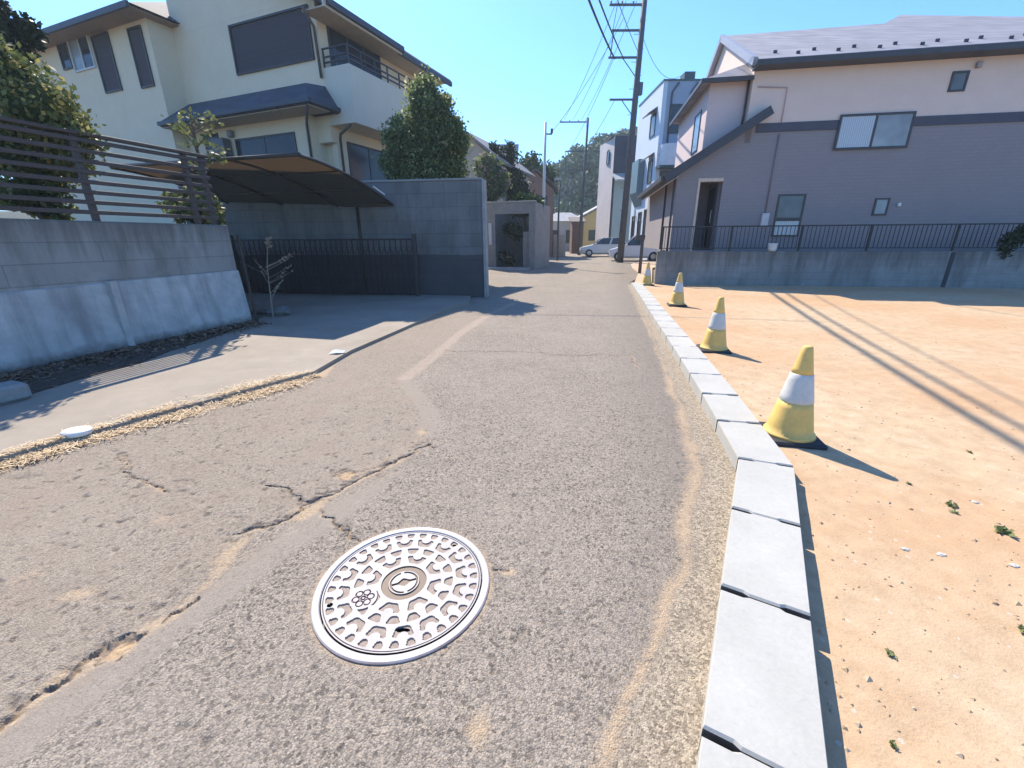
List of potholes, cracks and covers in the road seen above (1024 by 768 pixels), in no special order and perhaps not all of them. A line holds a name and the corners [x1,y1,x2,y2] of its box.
crack [113,455,167,492]
crack [0,596,201,732]
crack [233,443,435,542]
manhole cover [310,527,490,666]
